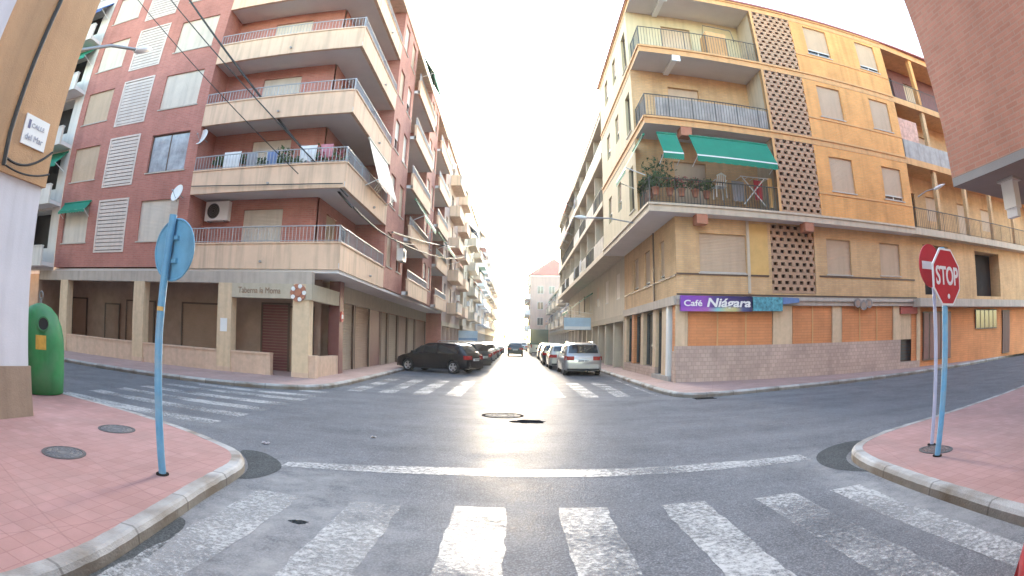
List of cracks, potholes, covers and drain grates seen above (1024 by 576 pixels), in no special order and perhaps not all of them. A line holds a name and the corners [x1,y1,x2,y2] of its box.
manhole cover [98,425,136,433]
manhole cover [41,446,86,459]
